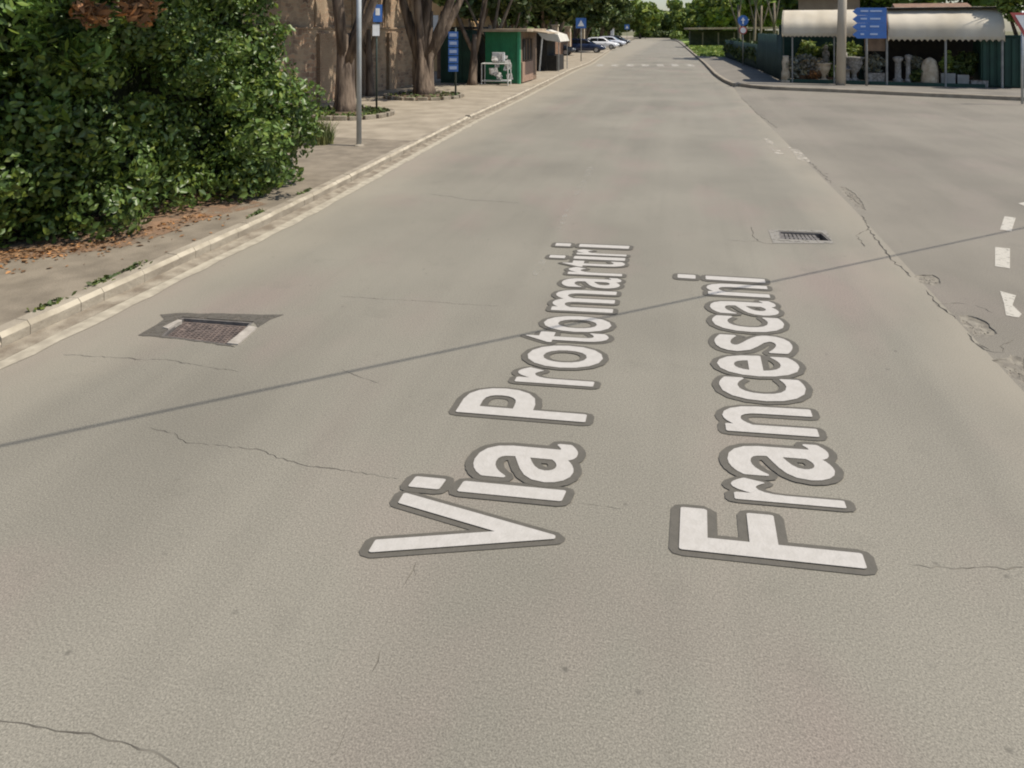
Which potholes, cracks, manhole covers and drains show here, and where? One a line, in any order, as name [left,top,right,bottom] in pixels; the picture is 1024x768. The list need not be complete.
crack [0,720,179,768]
crack [148,427,396,479]
crack [66,354,237,372]
